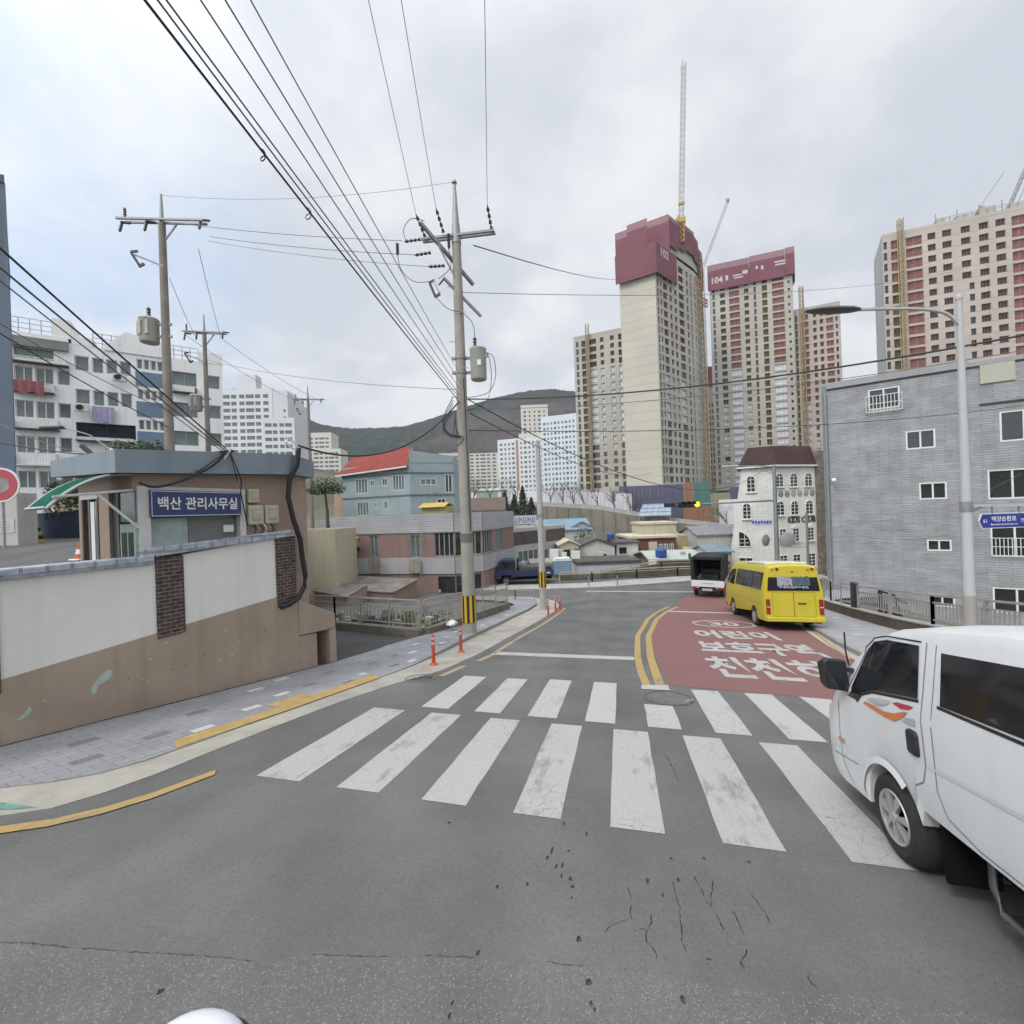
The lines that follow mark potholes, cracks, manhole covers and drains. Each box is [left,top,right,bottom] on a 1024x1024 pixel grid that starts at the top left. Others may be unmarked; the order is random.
manhole cover [405,674,436,683]
manhole cover [644,691,694,706]
crack [672,874,772,969]
crack [605,888,657,958]
